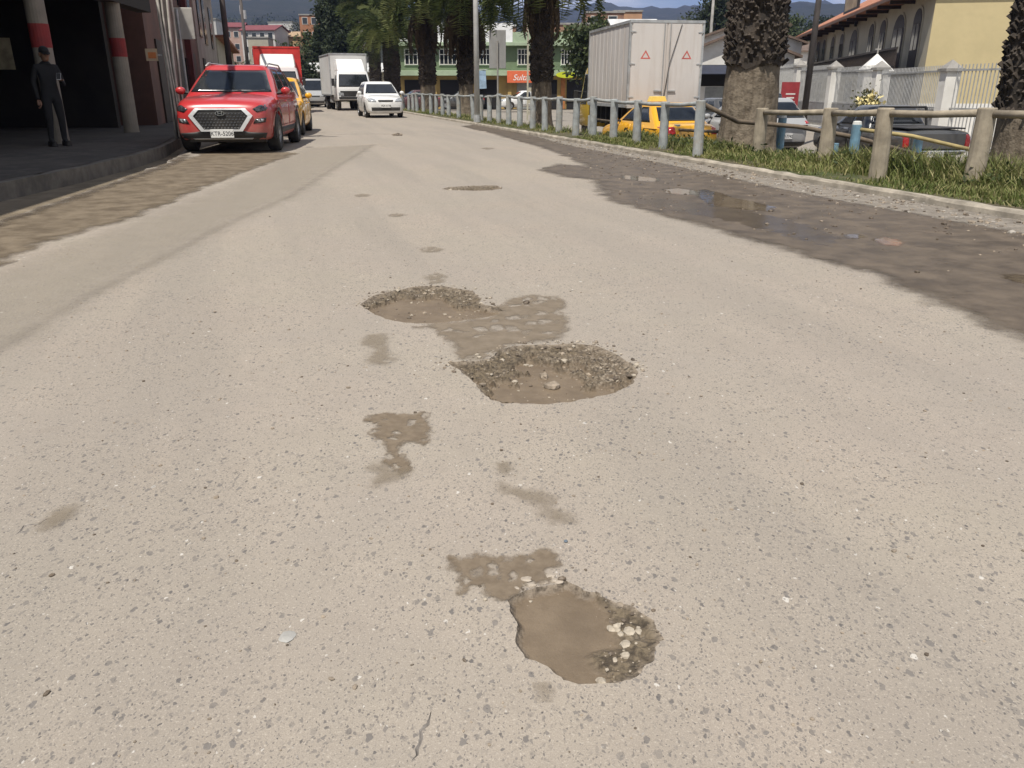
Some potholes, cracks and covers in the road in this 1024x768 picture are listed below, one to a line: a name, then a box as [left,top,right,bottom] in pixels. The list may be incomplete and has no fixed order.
crack [412,712,431,760]
pothole [507,581,664,684]
pothole [360,286,504,324]
pothole [448,343,638,404]
